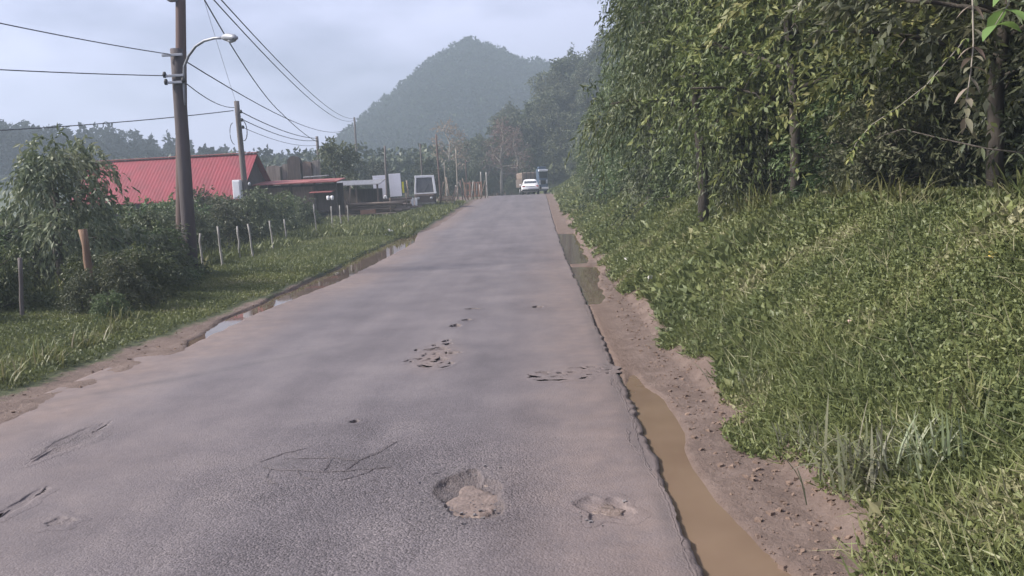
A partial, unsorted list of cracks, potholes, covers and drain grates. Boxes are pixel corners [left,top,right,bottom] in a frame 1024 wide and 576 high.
pothole [408,464,519,529]
pothole [559,492,651,528]
pothole [521,363,621,383]
pothole [396,338,470,370]
crack [260,441,397,484]
